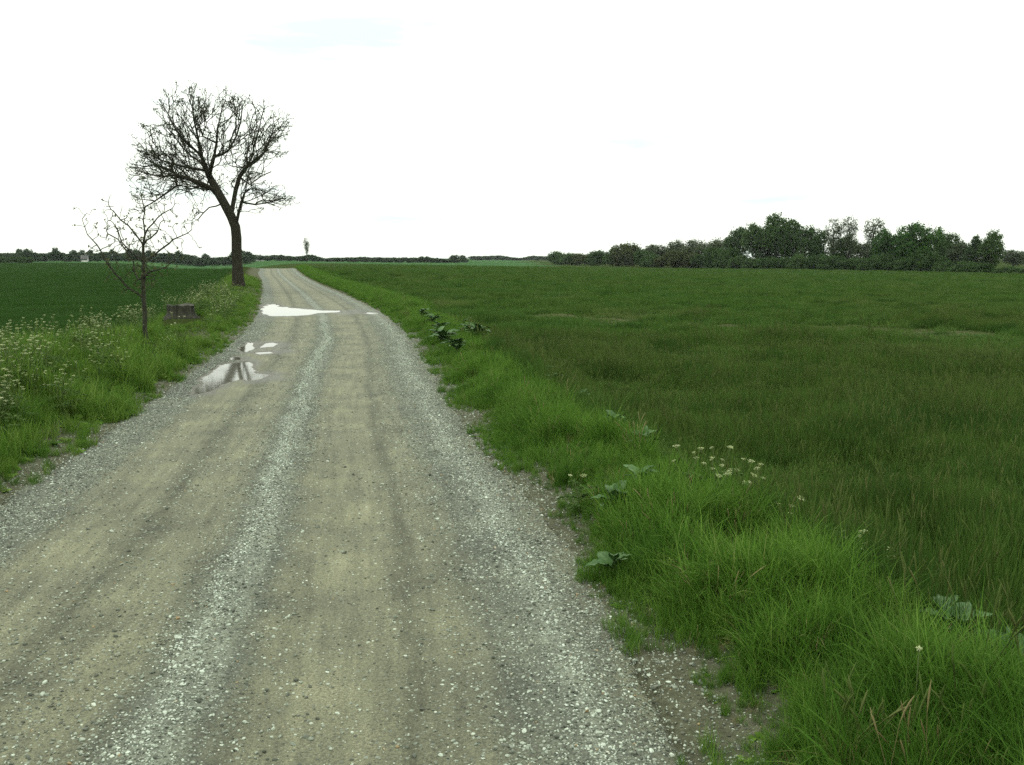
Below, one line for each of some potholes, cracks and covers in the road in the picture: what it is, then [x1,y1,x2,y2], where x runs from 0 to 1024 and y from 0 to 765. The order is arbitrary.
pothole [187,361,275,395]
pothole [259,304,342,316]
pothole [236,342,258,353]
